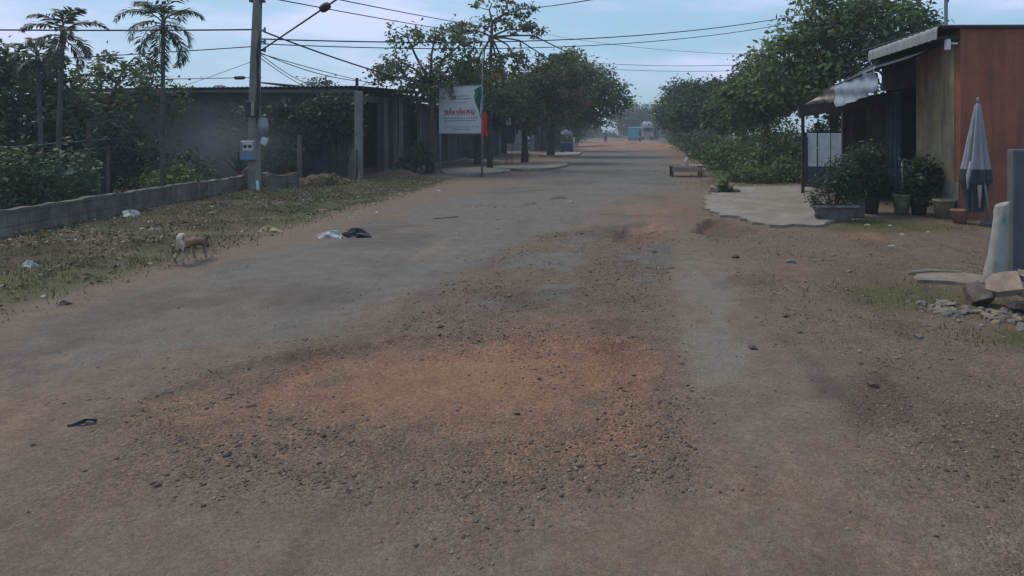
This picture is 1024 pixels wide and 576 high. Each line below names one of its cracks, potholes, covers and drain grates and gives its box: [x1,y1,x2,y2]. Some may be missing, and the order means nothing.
pothole [612,221,671,246]
pothole [129,333,672,483]
pothole [690,219,766,239]
